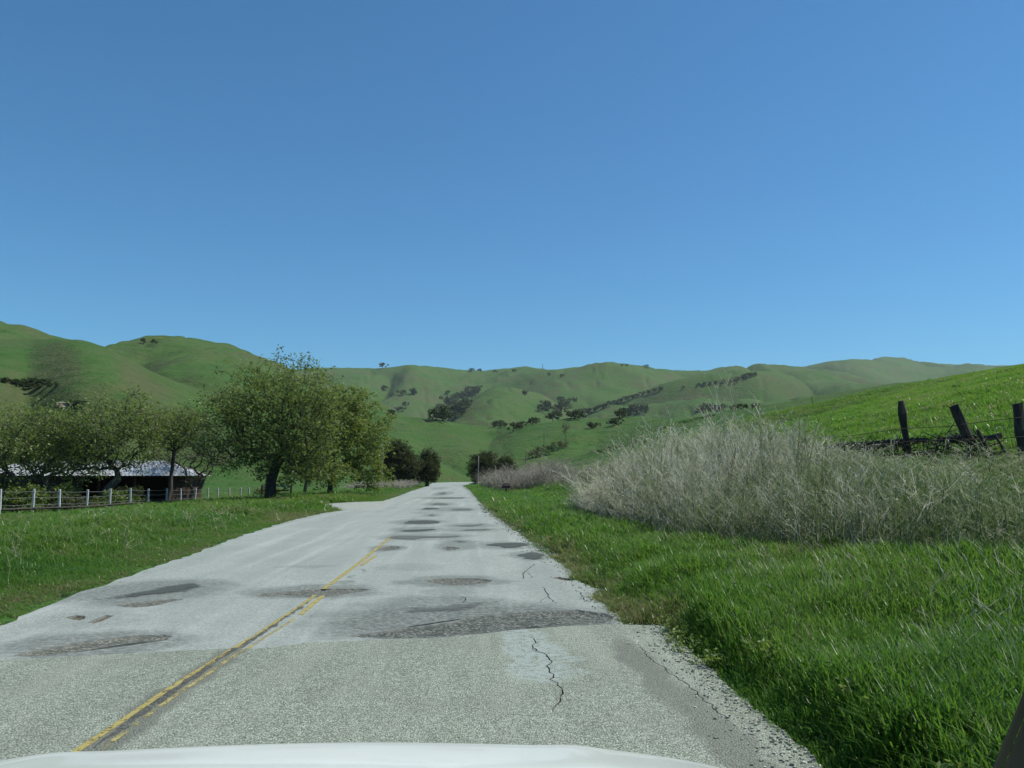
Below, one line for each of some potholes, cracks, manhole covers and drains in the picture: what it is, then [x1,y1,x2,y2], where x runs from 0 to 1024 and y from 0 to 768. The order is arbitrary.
crack [497,637,564,721]
crack [638,644,727,723]
